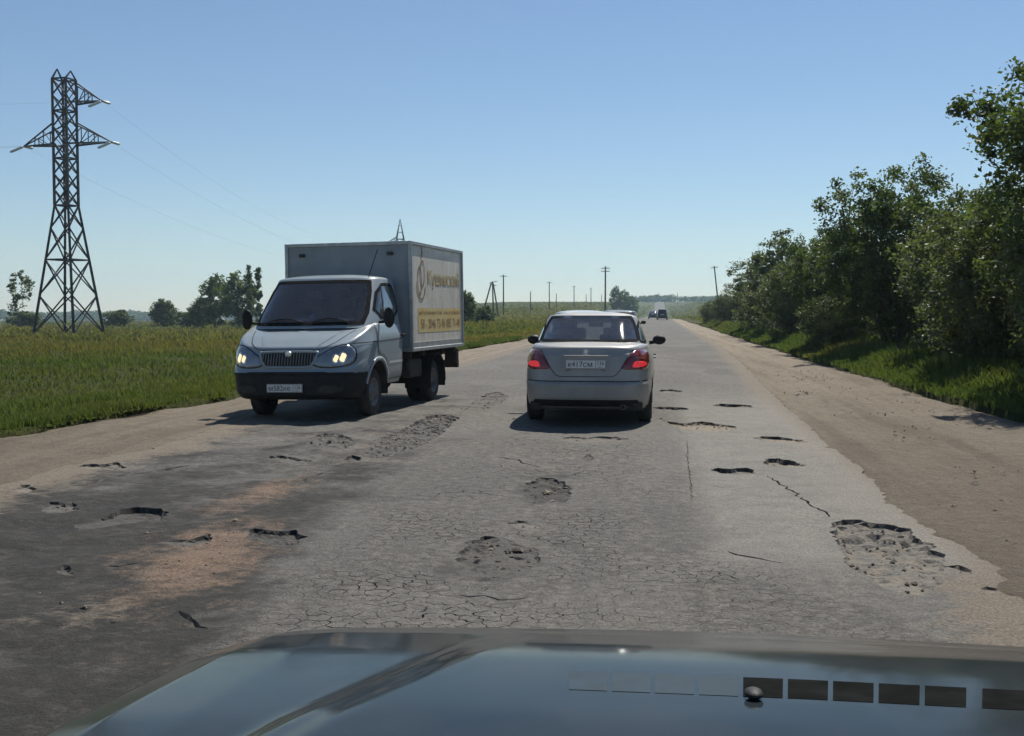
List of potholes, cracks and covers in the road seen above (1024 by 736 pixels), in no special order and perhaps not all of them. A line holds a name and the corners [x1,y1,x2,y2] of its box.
pothole [660,418,737,432]
pothole [947,565,972,574]
crack [217,506,1006,650]
crack [770,477,830,517]
pothole [246,528,308,547]
pothole [72,507,169,530]
pothole [454,536,541,583]
pothole [755,436,806,444]
pothole [462,392,508,411]
pothole [364,415,459,460]
pothole [830,519,947,596]
